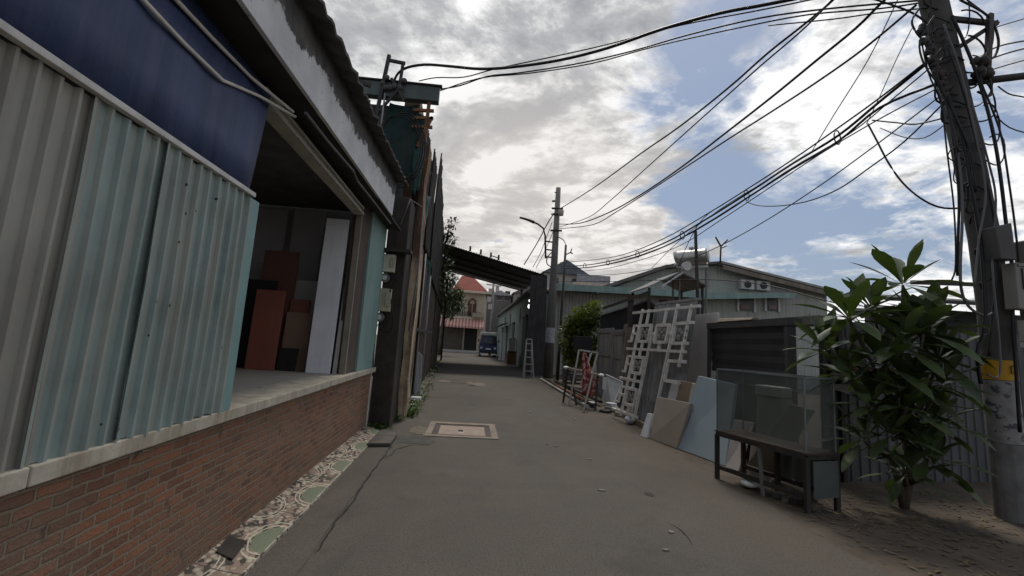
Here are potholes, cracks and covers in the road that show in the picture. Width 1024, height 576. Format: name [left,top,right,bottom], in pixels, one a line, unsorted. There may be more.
manhole cover [423,421,499,440]
crack [315,445,409,552]
